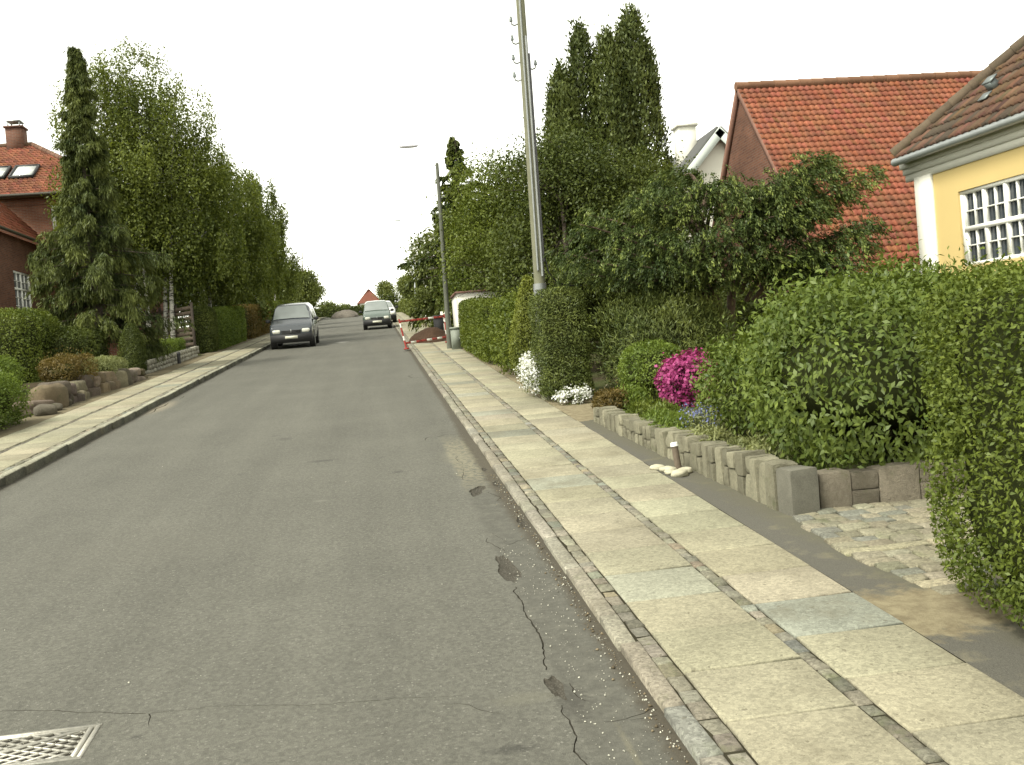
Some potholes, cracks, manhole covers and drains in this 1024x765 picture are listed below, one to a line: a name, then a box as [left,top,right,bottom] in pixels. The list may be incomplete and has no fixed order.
pothole [469,486,486,497]
pothole [544,675,567,700]
pothole [495,555,522,583]
crack [486,534,587,765]
crack [18,696,492,724]
